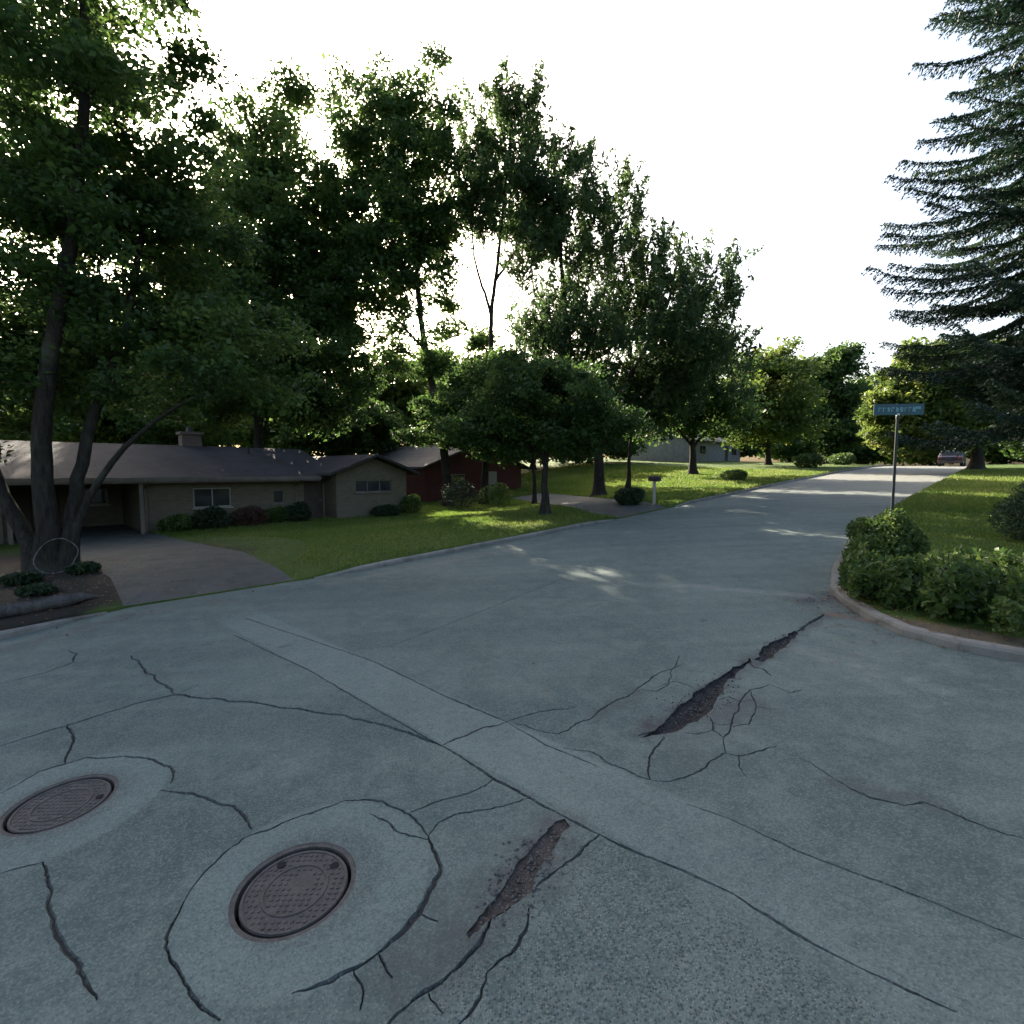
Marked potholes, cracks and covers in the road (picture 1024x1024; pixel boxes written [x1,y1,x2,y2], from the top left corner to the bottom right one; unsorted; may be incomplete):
pothole [466,819,570,938]
crack [0,655,802,1024]
manhole cover [228,843,356,943]
pothole [755,631,798,662]
pothole [644,658,752,737]
crack [7,650,78,683]
manhole cover [0,774,119,837]
